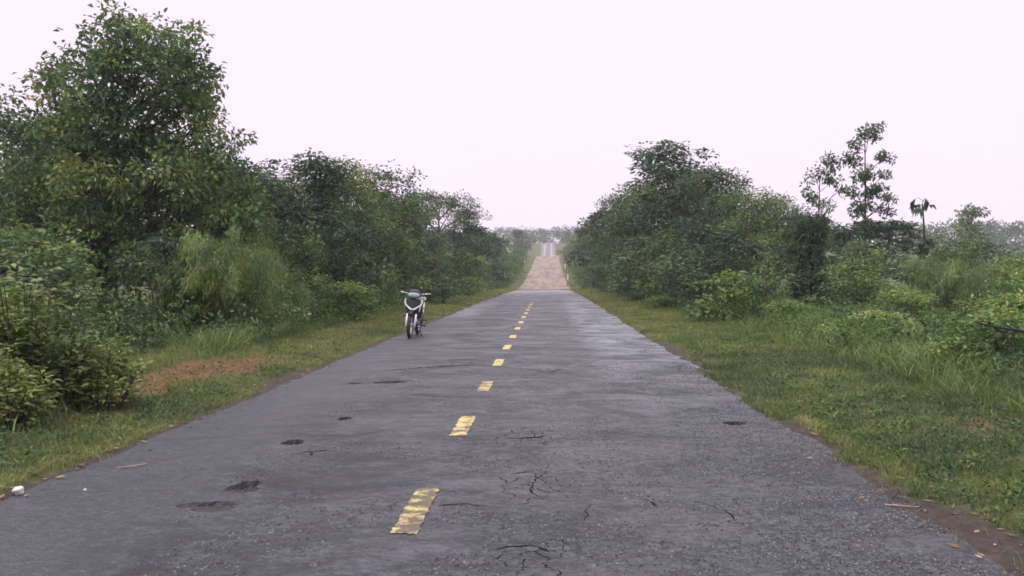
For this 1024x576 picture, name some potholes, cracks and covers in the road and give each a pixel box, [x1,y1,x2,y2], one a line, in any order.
crack [493,539,582,576]
pothole [176,501,236,513]
crack [499,472,562,504]
crack [495,427,553,445]
pothole [223,480,262,493]
